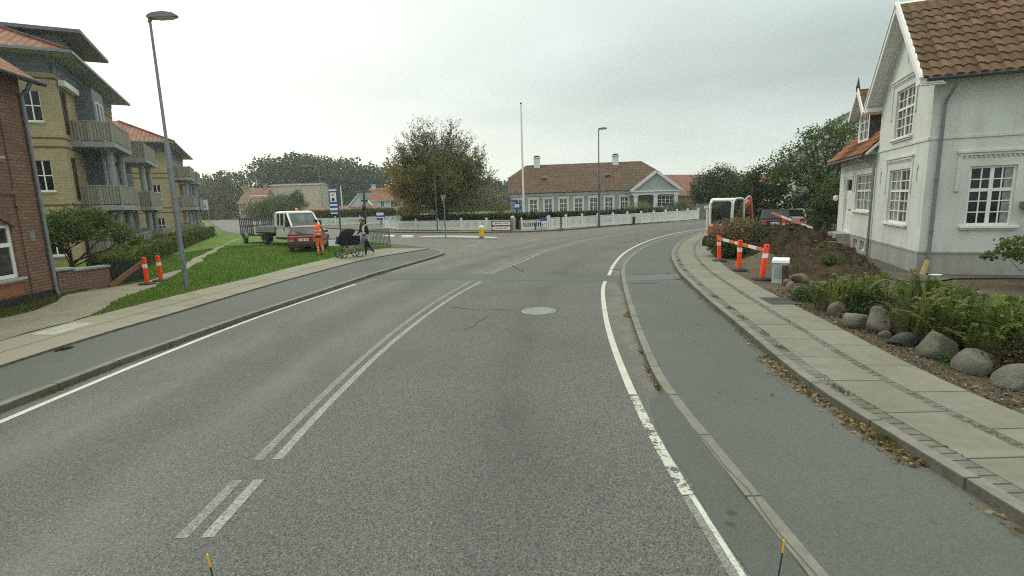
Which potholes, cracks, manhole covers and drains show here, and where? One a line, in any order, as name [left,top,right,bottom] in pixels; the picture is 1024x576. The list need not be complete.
manhole cover [520,307,558,315]
